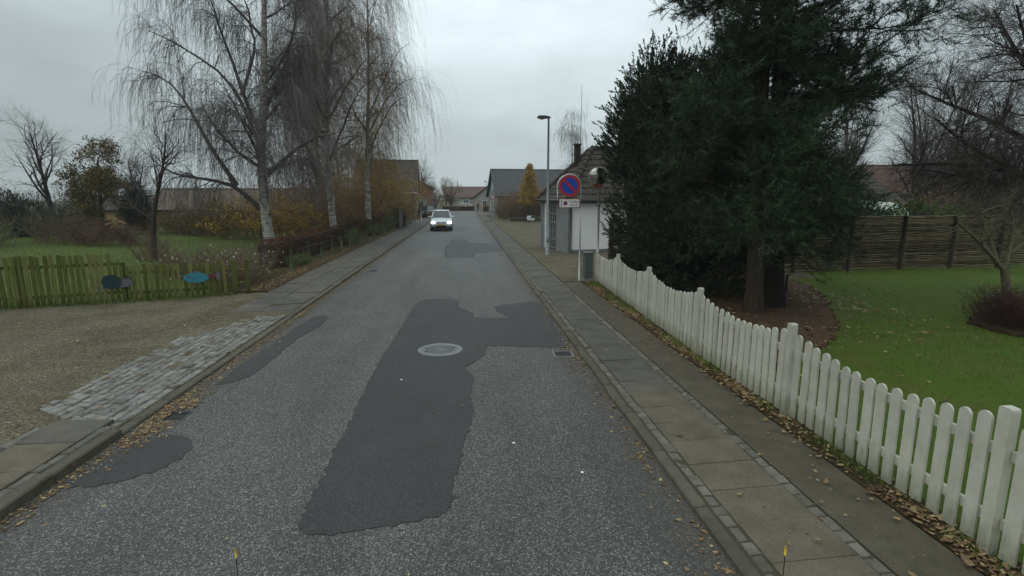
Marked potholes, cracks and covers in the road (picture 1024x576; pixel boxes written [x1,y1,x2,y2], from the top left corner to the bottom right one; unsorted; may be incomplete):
manhole cover [418,343,463,356]
